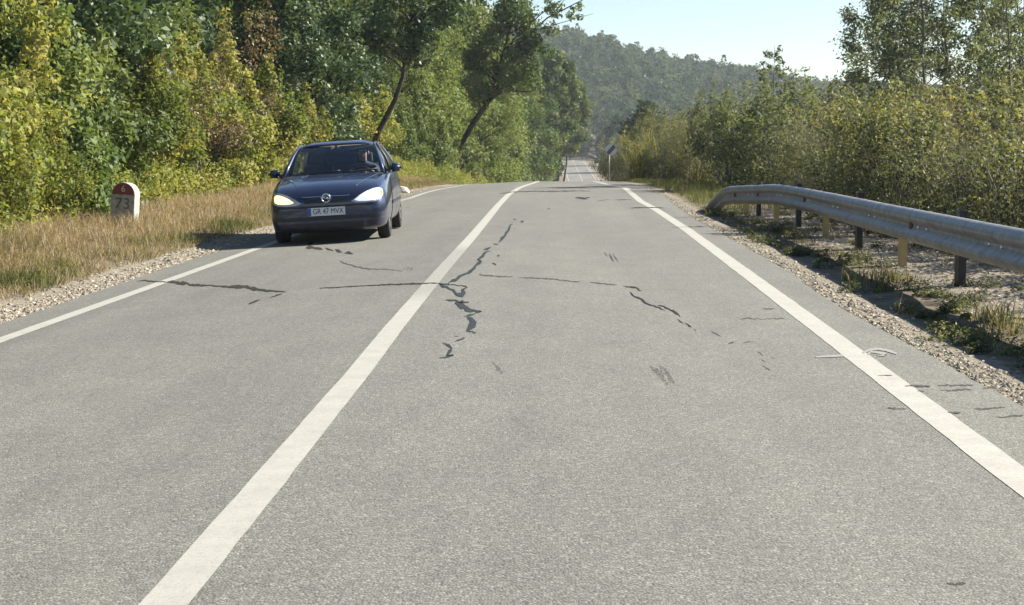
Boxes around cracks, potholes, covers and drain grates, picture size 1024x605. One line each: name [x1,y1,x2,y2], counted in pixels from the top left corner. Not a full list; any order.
crack [479,274,775,371]
crack [878,375,1023,418]
crack [306,242,442,288]
crack [140,280,285,304]
crack [500,188,662,208]
